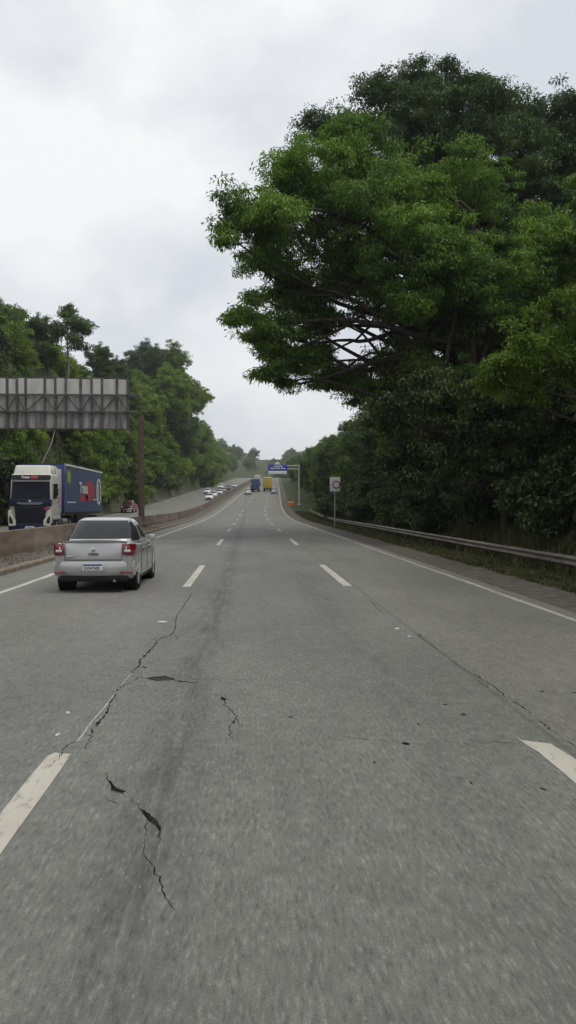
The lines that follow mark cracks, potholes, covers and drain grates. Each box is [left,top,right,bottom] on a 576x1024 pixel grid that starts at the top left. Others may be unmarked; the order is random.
crack [54,592,226,910]
